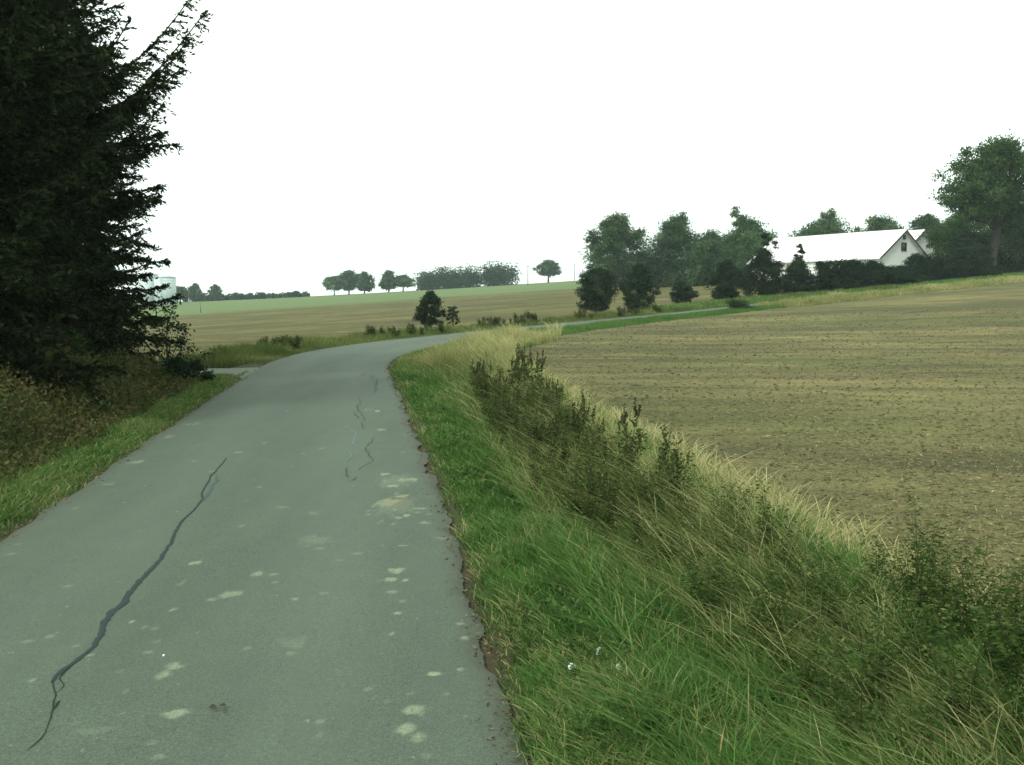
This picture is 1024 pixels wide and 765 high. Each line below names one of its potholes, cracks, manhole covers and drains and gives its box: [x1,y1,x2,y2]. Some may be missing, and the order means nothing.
crack [344,373,378,480]
